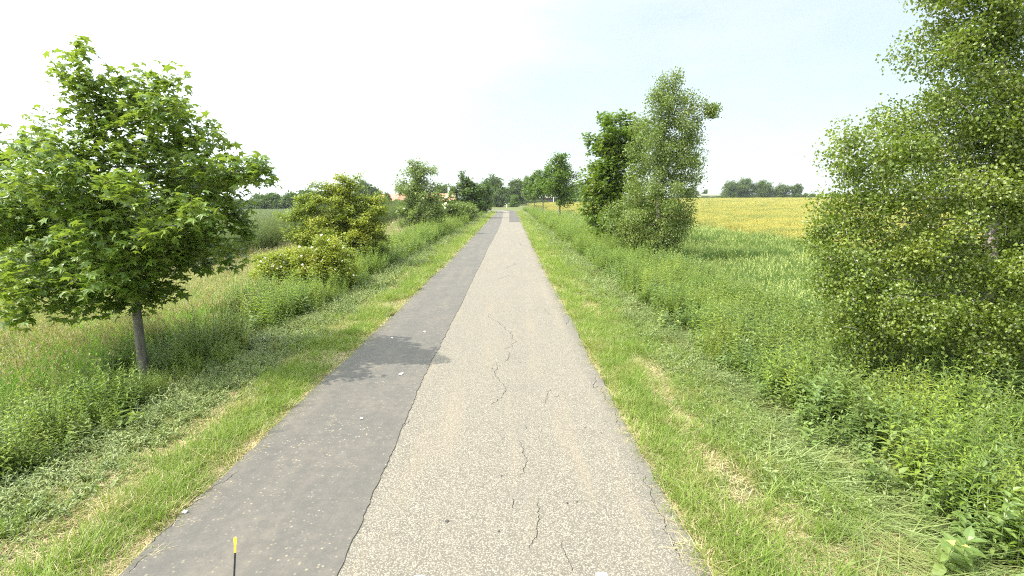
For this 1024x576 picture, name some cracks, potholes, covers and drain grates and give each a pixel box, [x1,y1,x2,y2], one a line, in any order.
crack [512,498,540,548]
crack [632,461,686,572]
